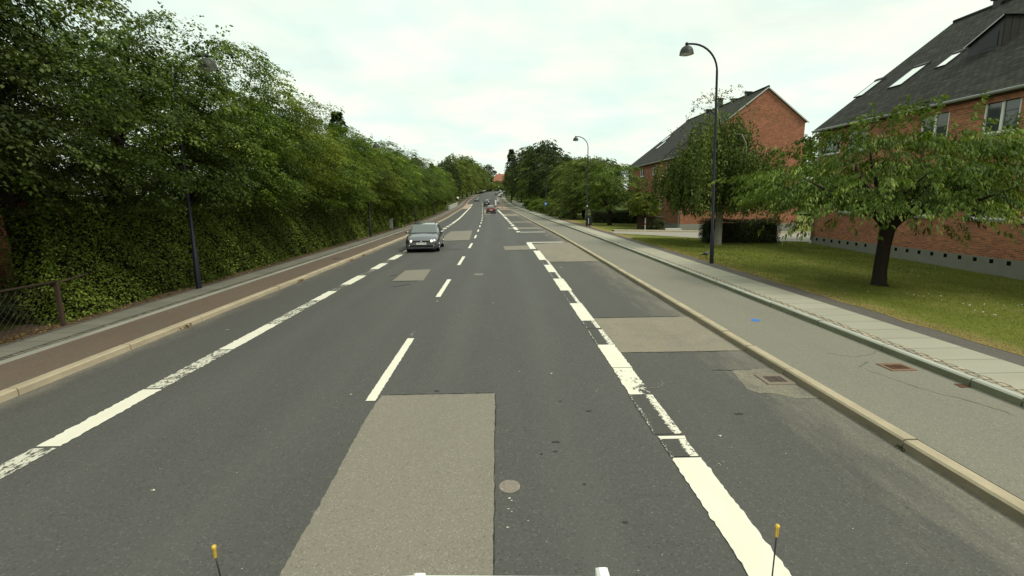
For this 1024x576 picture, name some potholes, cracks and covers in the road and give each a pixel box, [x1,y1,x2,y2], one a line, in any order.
crack [827,351,1016,416]
